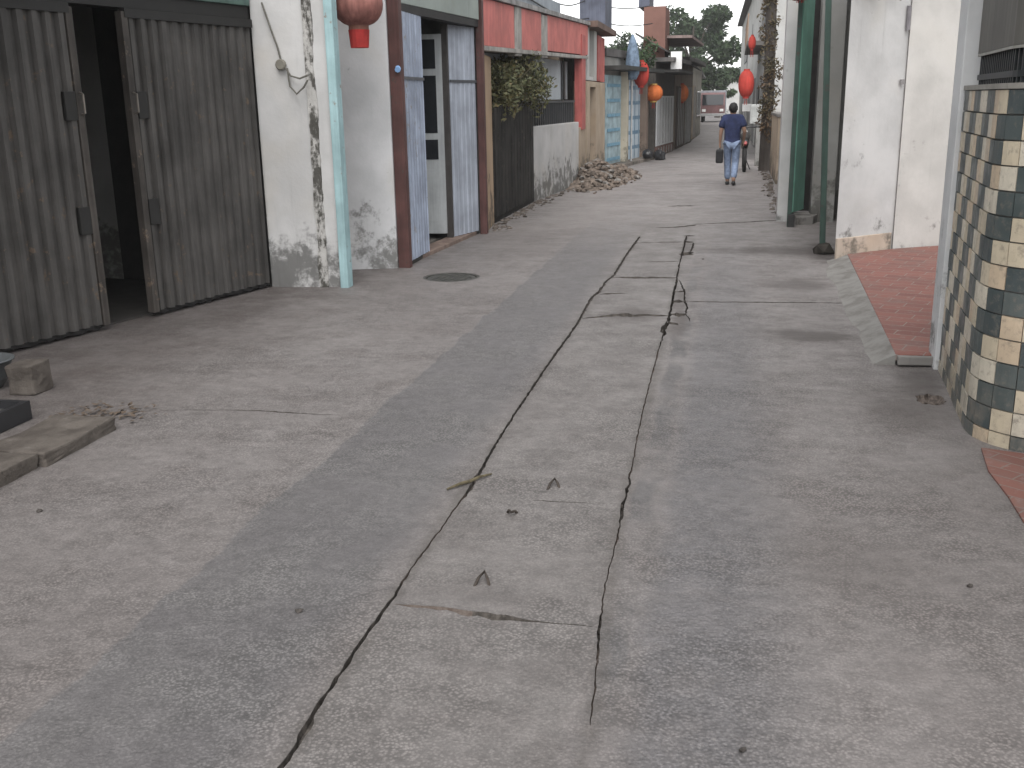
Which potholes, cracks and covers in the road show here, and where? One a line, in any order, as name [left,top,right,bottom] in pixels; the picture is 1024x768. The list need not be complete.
pothole [916,394,947,405]
manhole cover [423,273,480,282]
crack [278,220,817,768]
